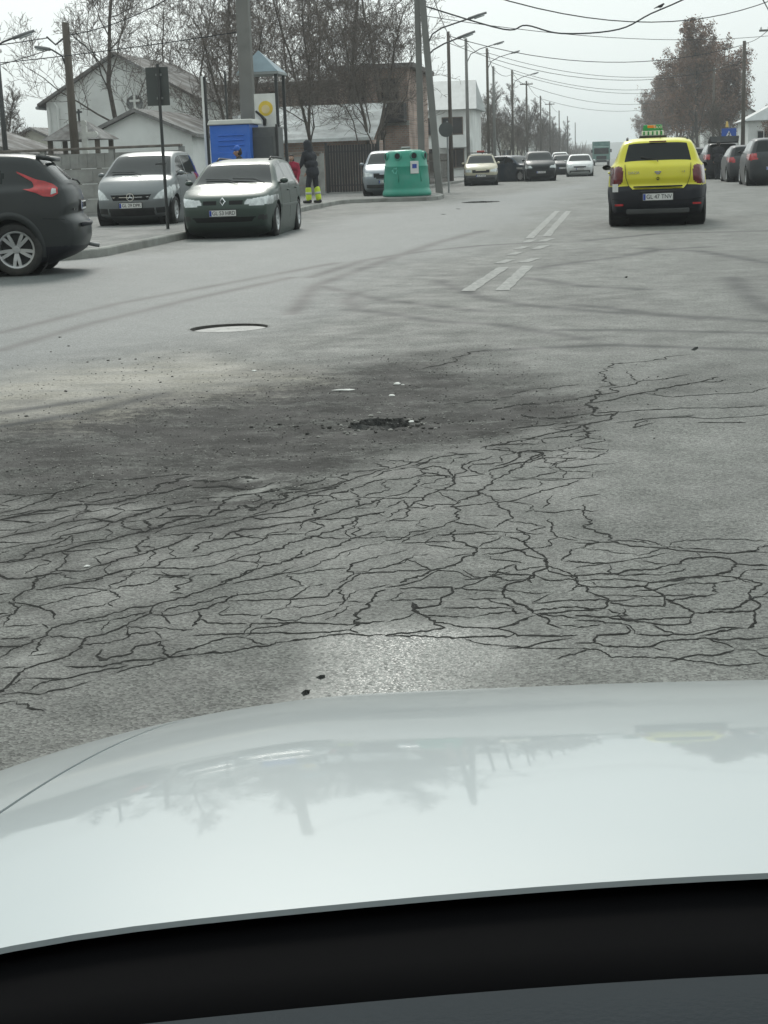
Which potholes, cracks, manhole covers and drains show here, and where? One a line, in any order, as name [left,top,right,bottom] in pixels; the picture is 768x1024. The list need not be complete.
manhole cover [188,323,270,332]
pothole [349,418,411,431]
crack [0,354,768,711]
